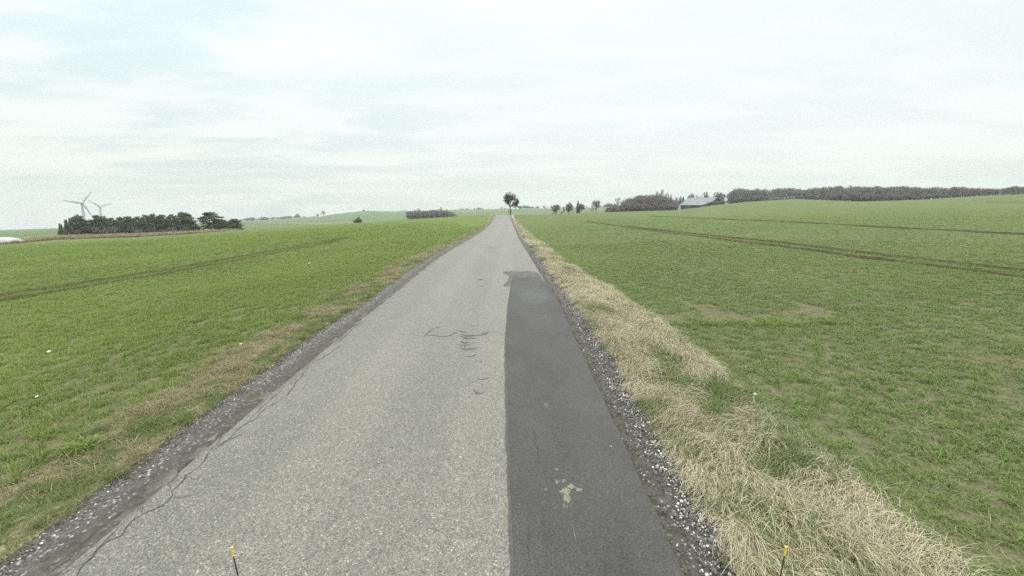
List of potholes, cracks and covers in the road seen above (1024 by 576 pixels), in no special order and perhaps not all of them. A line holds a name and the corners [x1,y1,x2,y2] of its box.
crack [425,325,499,361]
